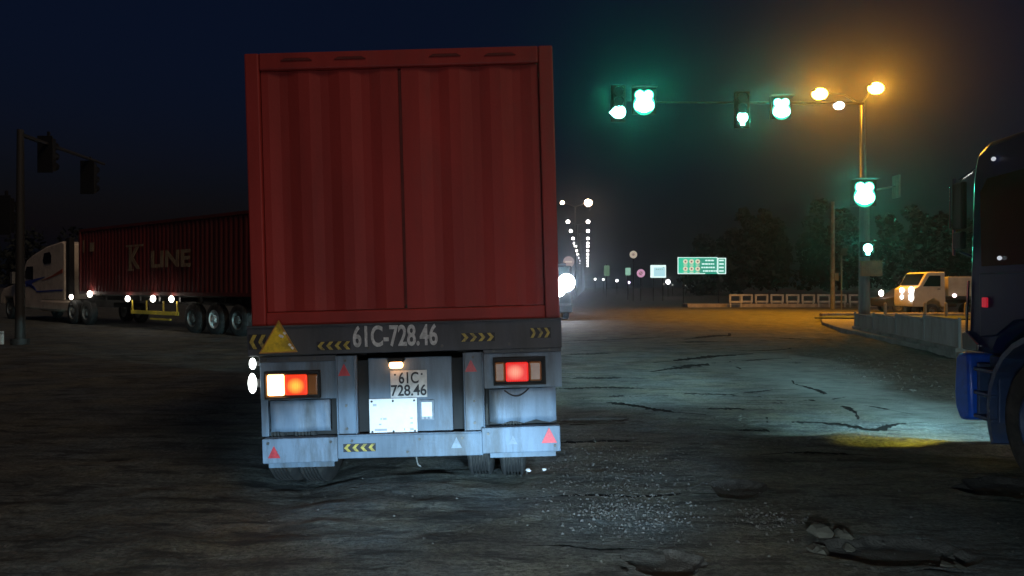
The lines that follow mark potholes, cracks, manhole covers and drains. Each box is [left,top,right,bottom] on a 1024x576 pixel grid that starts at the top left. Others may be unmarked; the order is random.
pothole [674,476,779,503]
crack [556,333,949,462]
pothole [608,547,720,576]
pothole [786,533,1009,573]
